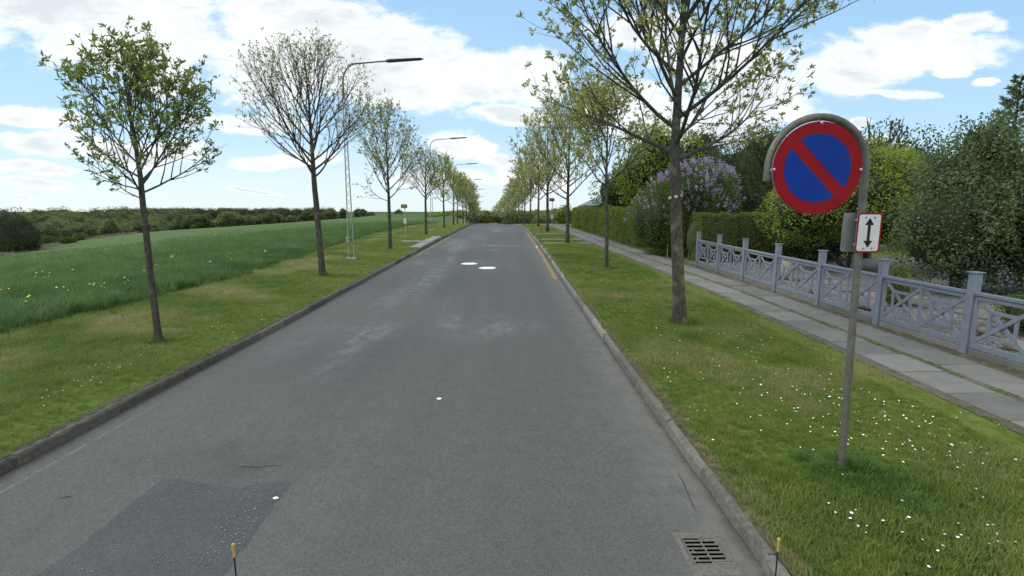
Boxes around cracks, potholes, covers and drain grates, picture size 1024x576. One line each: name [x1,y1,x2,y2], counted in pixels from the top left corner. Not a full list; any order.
drain grate [672,532,745,576]
